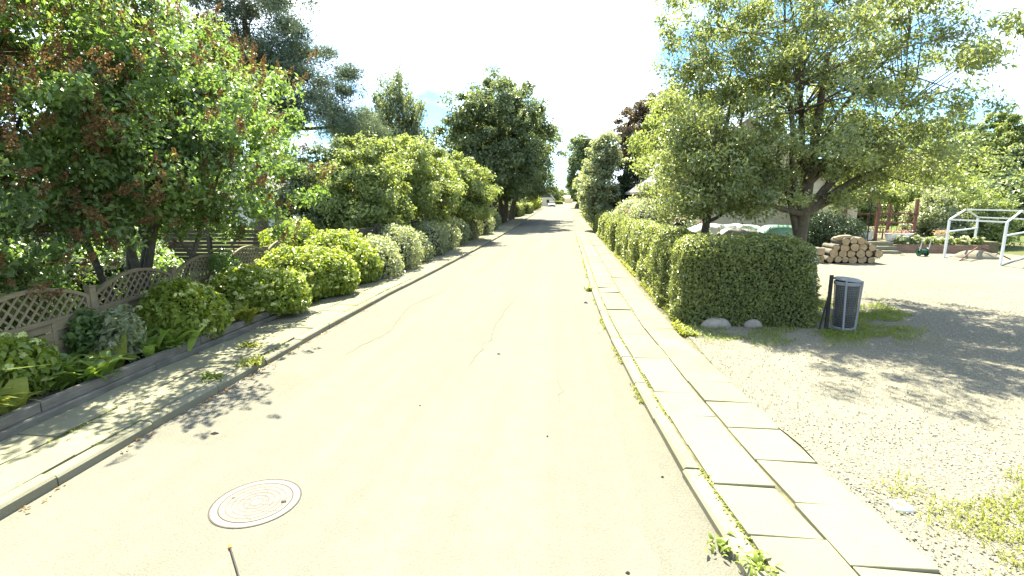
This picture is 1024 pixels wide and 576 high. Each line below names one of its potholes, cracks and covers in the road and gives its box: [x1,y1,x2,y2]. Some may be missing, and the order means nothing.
manhole cover [208,479,302,528]
